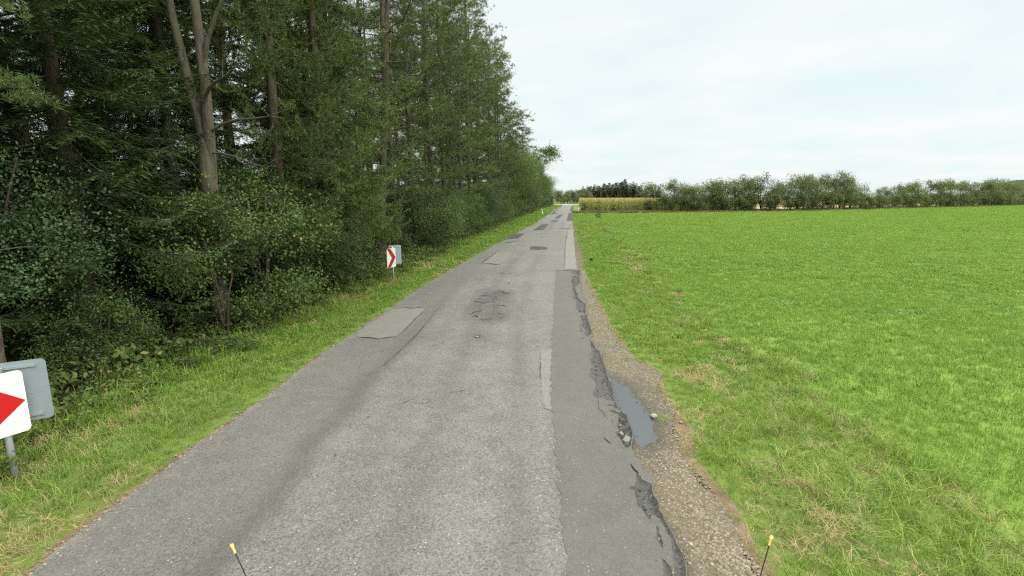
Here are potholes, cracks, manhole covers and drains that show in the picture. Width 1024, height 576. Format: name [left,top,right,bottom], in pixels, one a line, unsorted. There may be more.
pothole [630,475,686,576]
pothole [589,339,617,417]
pothole [478,303,496,318]
pothole [580,315,591,337]
pothole [611,410,633,448]
pothole [571,271,585,314]
